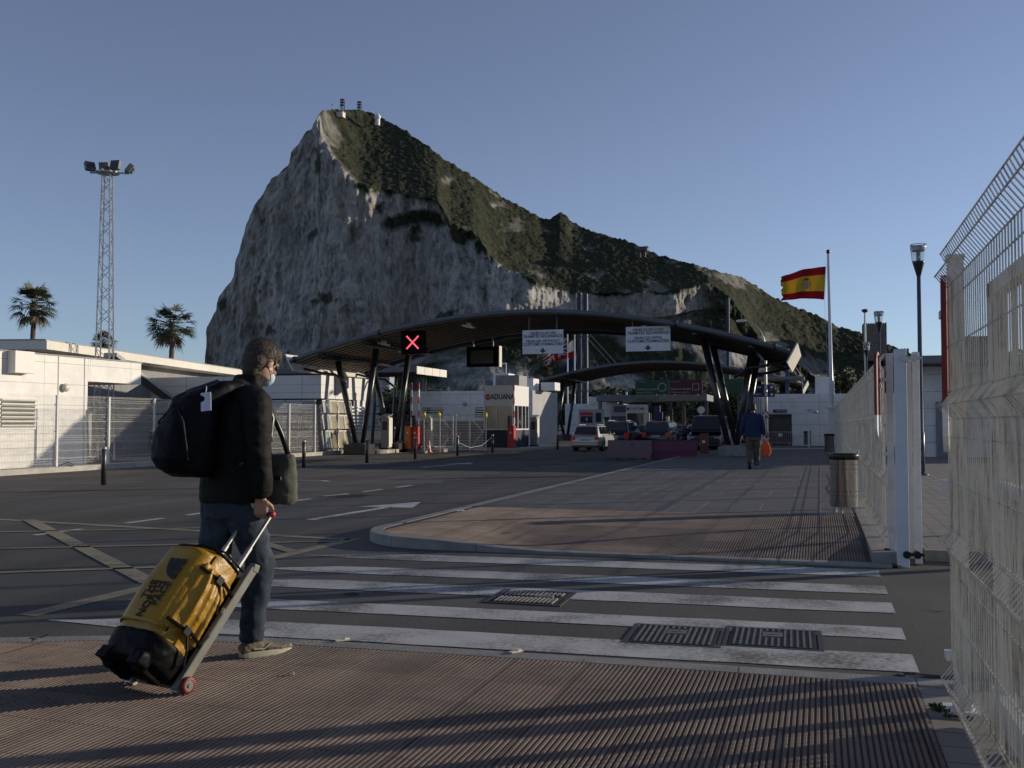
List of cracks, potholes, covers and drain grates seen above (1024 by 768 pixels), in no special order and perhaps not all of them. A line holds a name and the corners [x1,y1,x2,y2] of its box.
drain grate [482,589,577,607]
